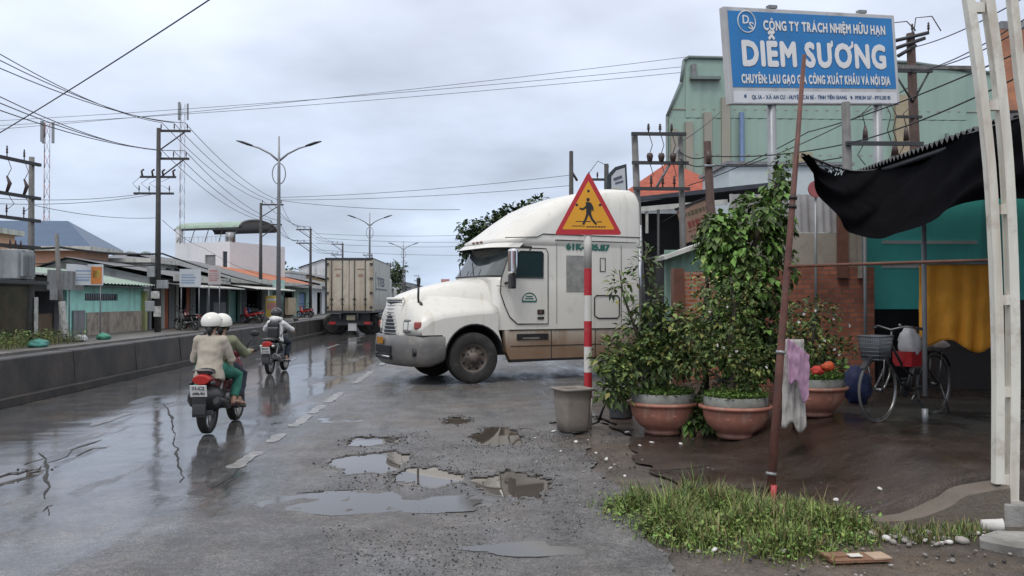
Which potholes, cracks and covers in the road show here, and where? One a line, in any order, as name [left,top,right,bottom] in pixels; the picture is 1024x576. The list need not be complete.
pothole [450,466,561,505]
crack [164,404,185,481]
pothole [462,424,531,448]
pothole [377,464,484,491]
pothole [436,415,475,426]
crack [24,440,107,515]
pothole [337,434,408,448]
pothole [312,448,417,478]
